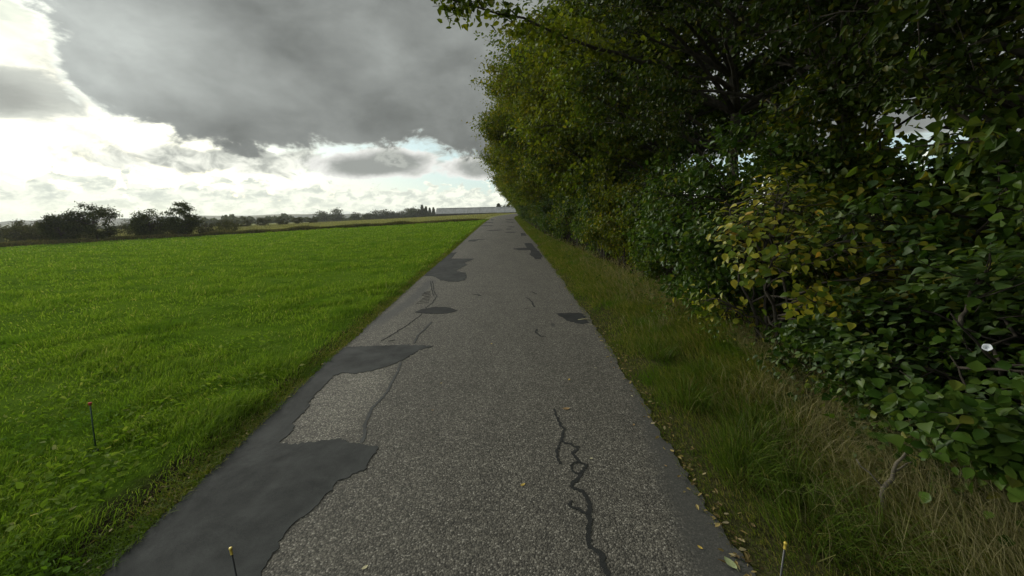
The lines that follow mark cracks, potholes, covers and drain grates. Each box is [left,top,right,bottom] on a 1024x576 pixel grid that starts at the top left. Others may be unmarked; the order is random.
crack [381,281,437,341]
